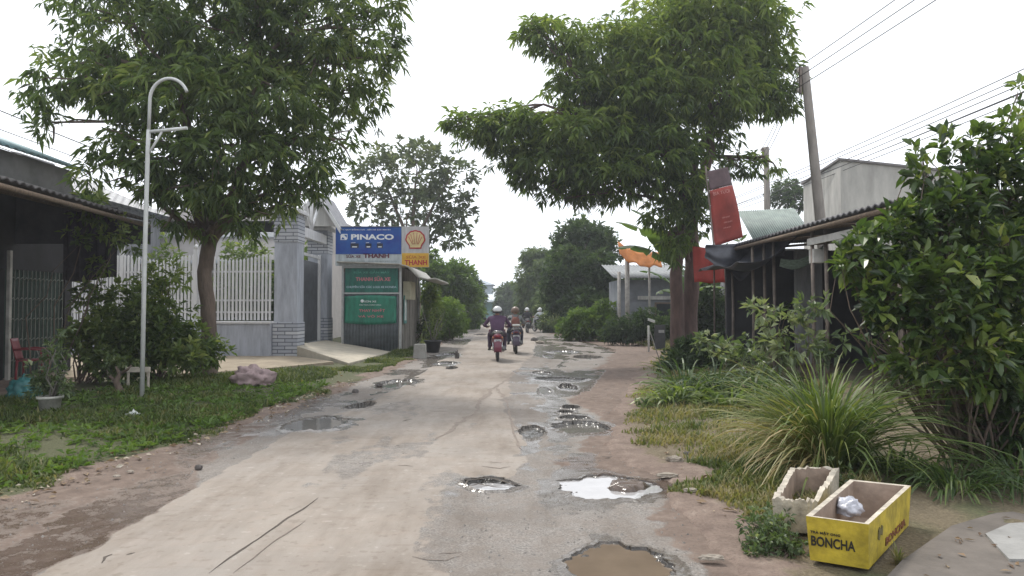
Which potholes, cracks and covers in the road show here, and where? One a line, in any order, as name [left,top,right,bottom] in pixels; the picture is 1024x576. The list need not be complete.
pothole [552,539,686,576]
crack [209,499,316,573]
pothole [455,476,526,493]
pothole [538,387,553,396]
pothole [274,415,355,434]
pothole [548,472,670,503]
pothole [546,420,613,436]
crack [435,370,521,488]
pothole [374,378,423,390]
pothole [515,425,548,442]
pothole [341,400,380,411]
pothole [556,383,579,391]
